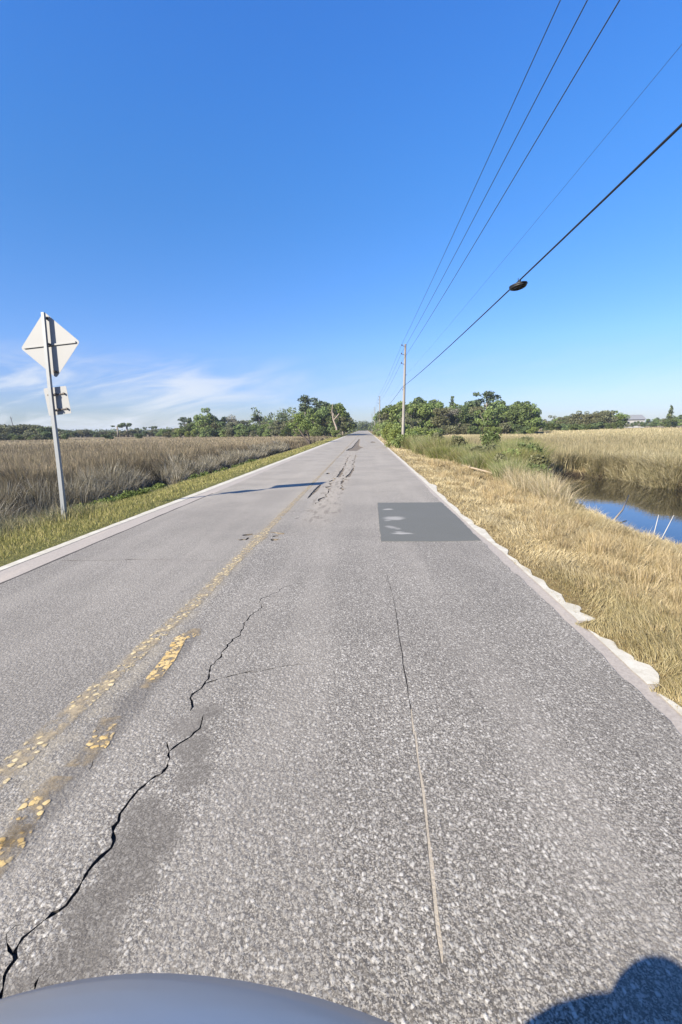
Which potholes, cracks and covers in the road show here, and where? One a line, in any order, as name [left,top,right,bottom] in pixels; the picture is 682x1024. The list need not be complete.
crack [280,455,357,519]
crack [0,583,304,999]
